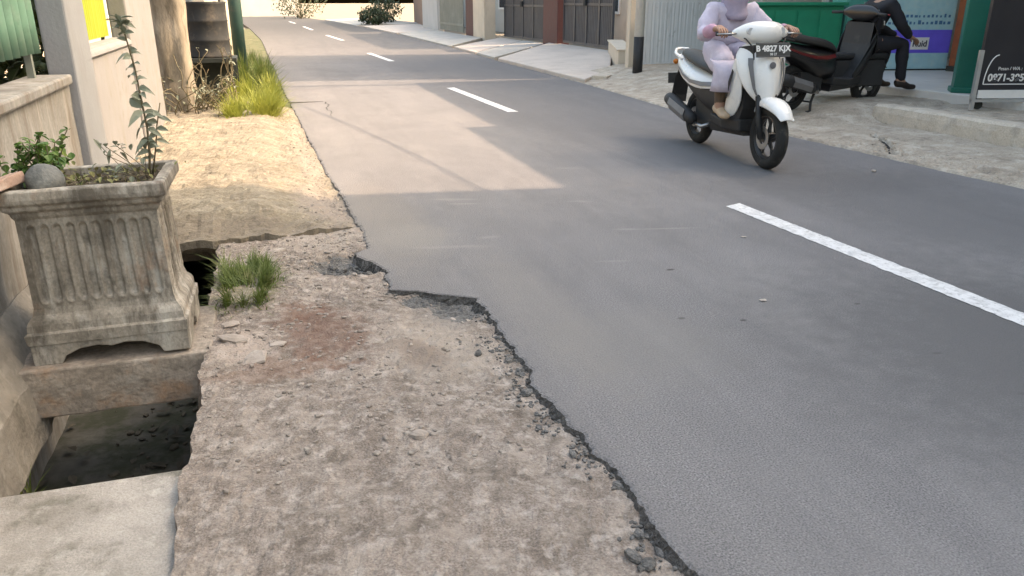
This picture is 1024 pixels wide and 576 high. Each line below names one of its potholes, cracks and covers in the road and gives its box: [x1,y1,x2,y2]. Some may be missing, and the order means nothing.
crack [874,137,897,154]
